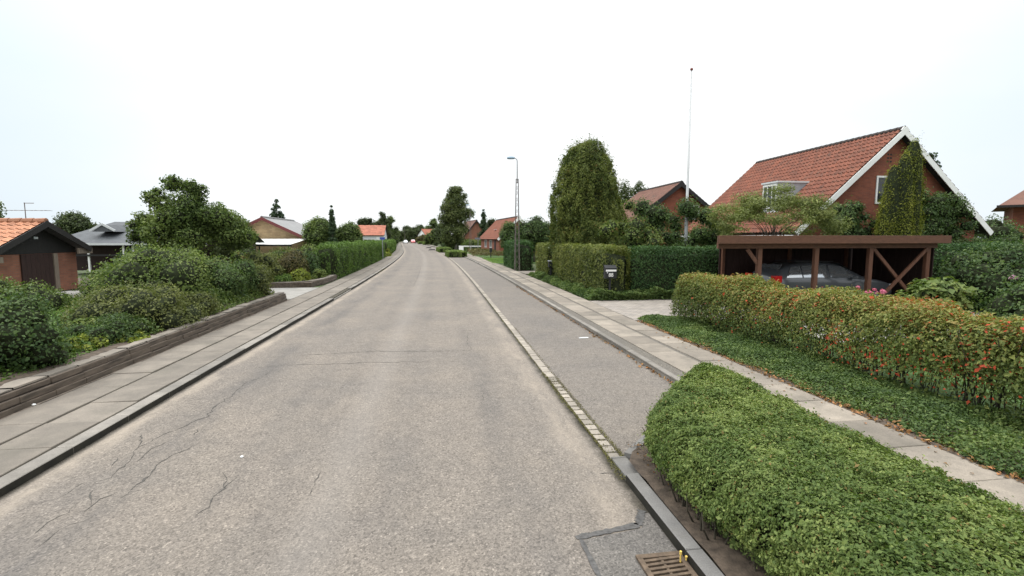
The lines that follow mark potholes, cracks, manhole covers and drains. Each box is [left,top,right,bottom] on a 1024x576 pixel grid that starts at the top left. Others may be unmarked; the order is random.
crack [35,330,479,545]
drain grate [635,551,698,576]
